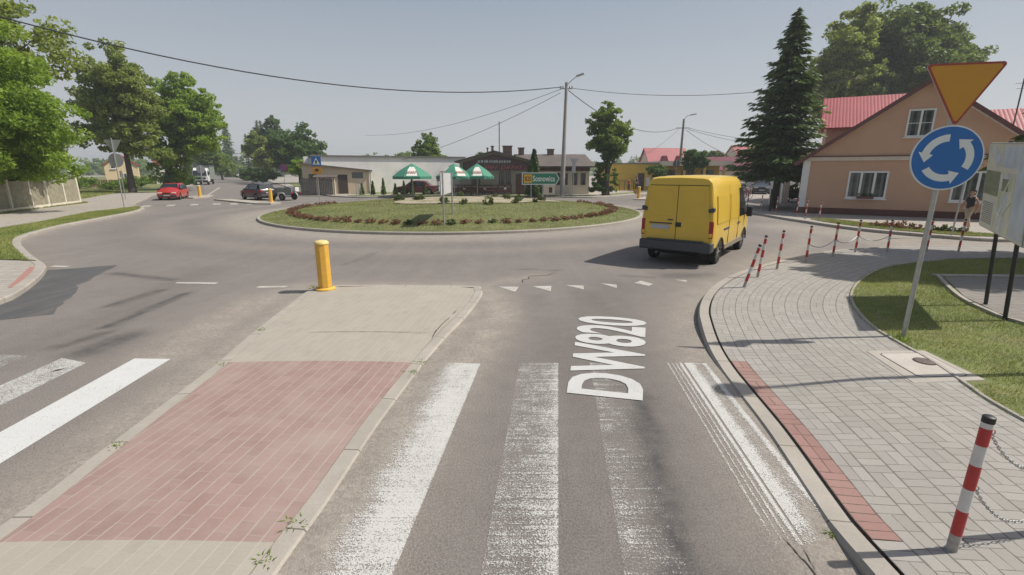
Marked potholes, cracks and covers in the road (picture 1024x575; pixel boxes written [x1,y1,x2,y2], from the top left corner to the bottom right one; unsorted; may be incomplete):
manhole cover [867,350,985,383]
crack [787,542,817,575]
